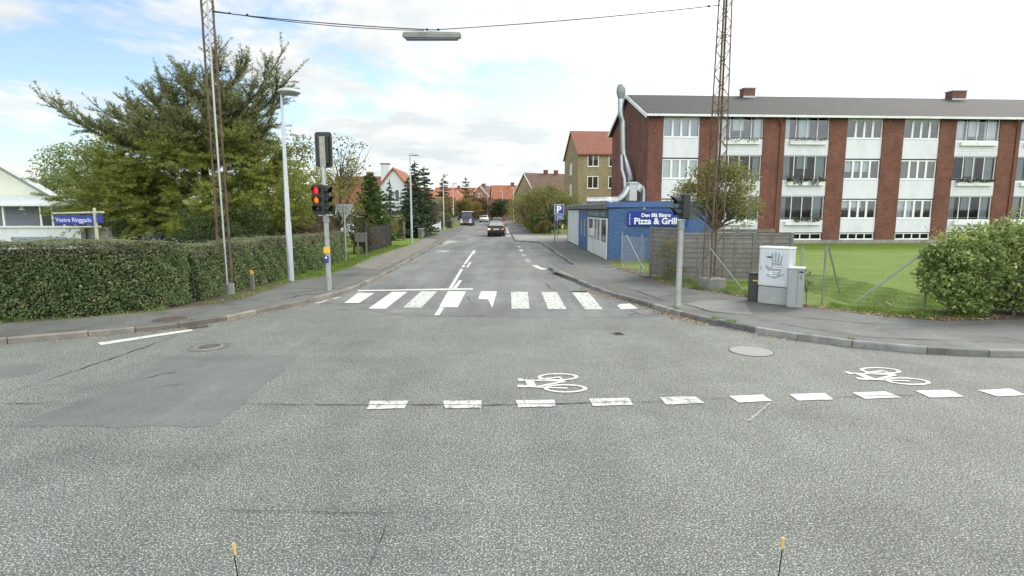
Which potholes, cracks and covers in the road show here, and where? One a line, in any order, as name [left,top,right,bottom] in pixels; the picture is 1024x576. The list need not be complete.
manhole cover [728,346,775,357]
manhole cover [186,342,231,351]
crack [7,338,168,394]
crack [217,509,406,573]
